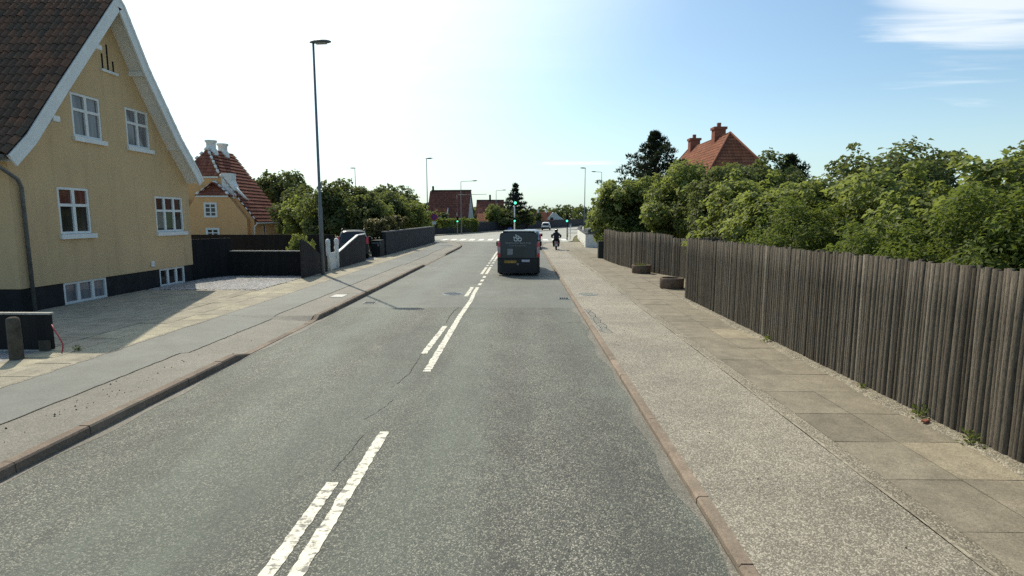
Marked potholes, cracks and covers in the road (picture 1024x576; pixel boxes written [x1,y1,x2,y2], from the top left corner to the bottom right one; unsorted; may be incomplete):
crack [585,310,614,333]
